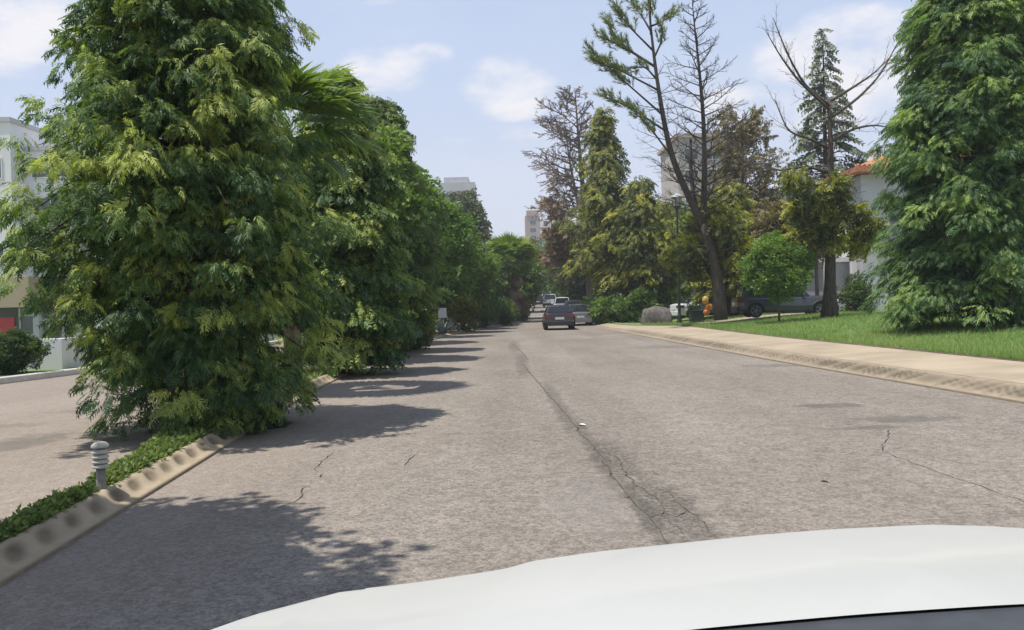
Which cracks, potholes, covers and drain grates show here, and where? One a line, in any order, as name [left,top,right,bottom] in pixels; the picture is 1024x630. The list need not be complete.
crack [272,452,334,511]
crack [514,345,715,544]
crack [834,423,1024,502]
